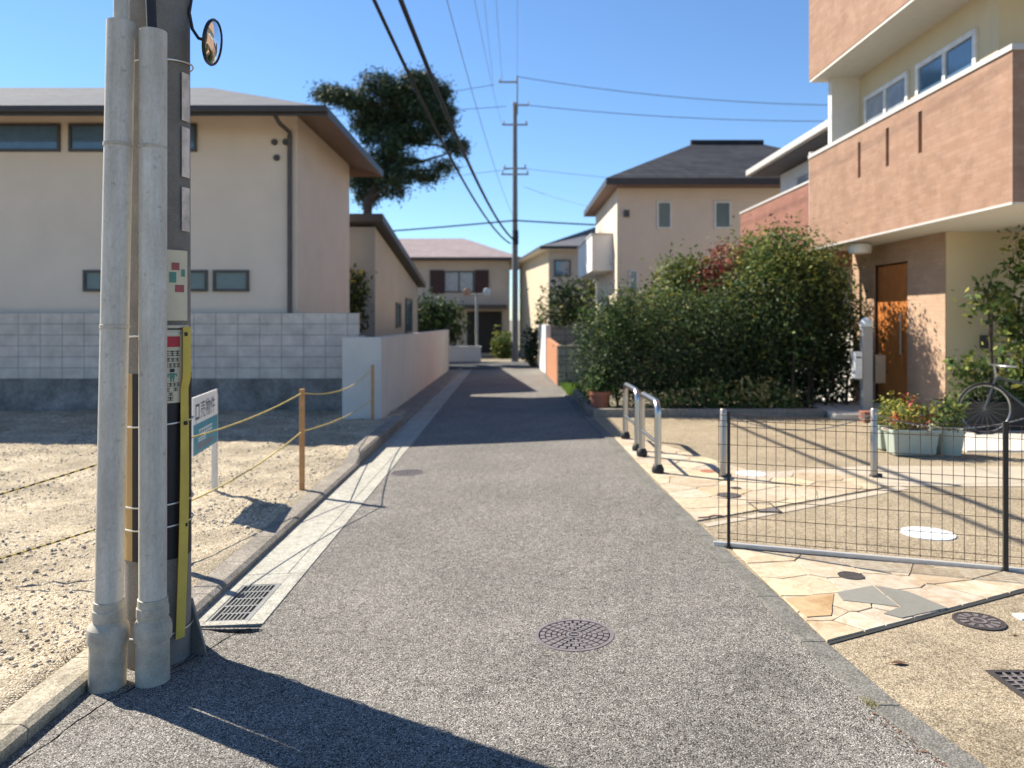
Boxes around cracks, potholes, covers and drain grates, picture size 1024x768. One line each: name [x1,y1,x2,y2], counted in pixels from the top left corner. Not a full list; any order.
utility cover [952,612,1007,631]
manhole cover [535,619,614,652]
utility cover [838,571,865,580]
drain grate [986,670,1024,699]
drain grate [207,584,281,622]
utility cover [900,526,956,541]
